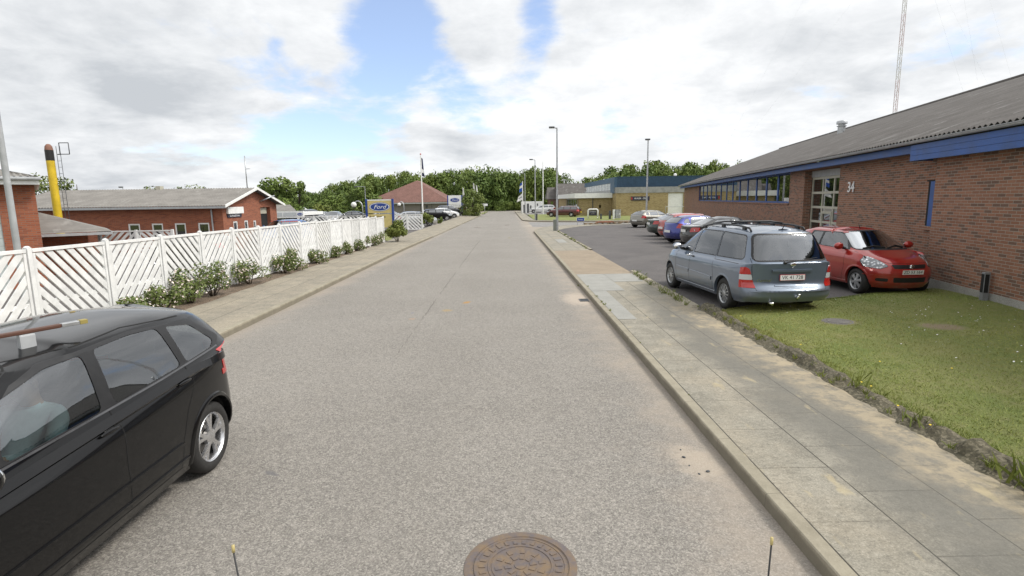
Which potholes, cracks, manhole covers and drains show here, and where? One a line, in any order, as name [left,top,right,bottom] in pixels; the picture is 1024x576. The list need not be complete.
manhole cover [464,532,577,576]
crack [394,243,478,357]
